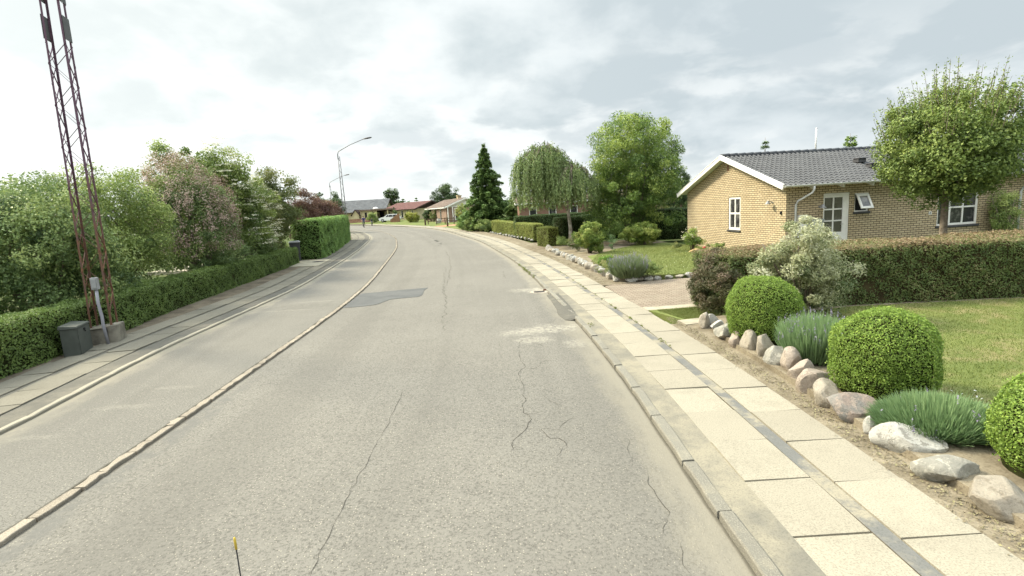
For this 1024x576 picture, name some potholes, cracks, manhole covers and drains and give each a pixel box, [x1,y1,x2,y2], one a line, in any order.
crack [647,472,691,574]
crack [310,393,402,576]
crack [510,340,582,454]
